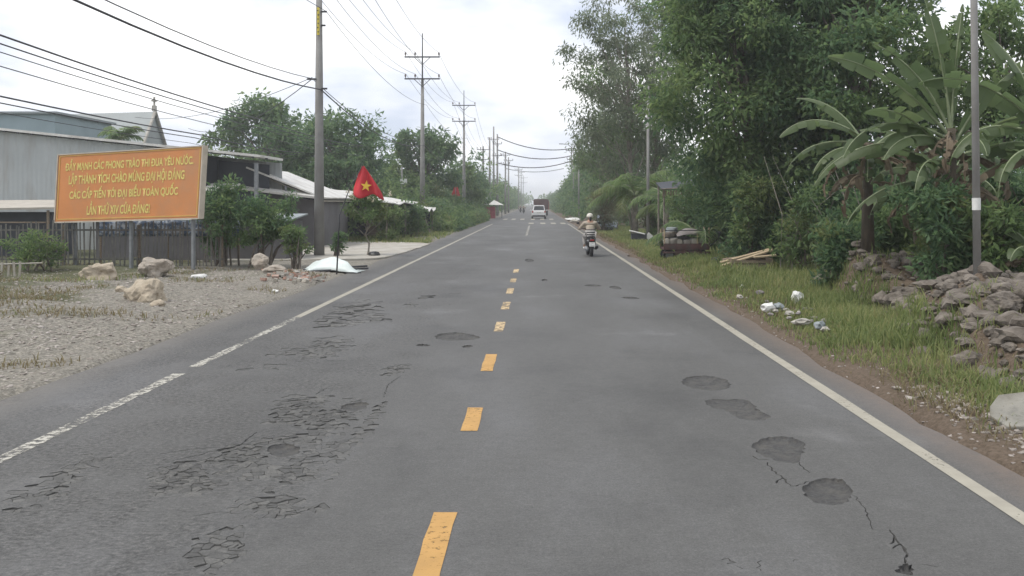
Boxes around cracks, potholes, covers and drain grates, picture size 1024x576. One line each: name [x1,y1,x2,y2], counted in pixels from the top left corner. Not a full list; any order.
crack [851,494,935,567]
crack [753,456,810,486]
crack [236,295,436,371]
crack [0,454,112,513]
pothole [435,332,481,341]
crack [147,364,411,576]
